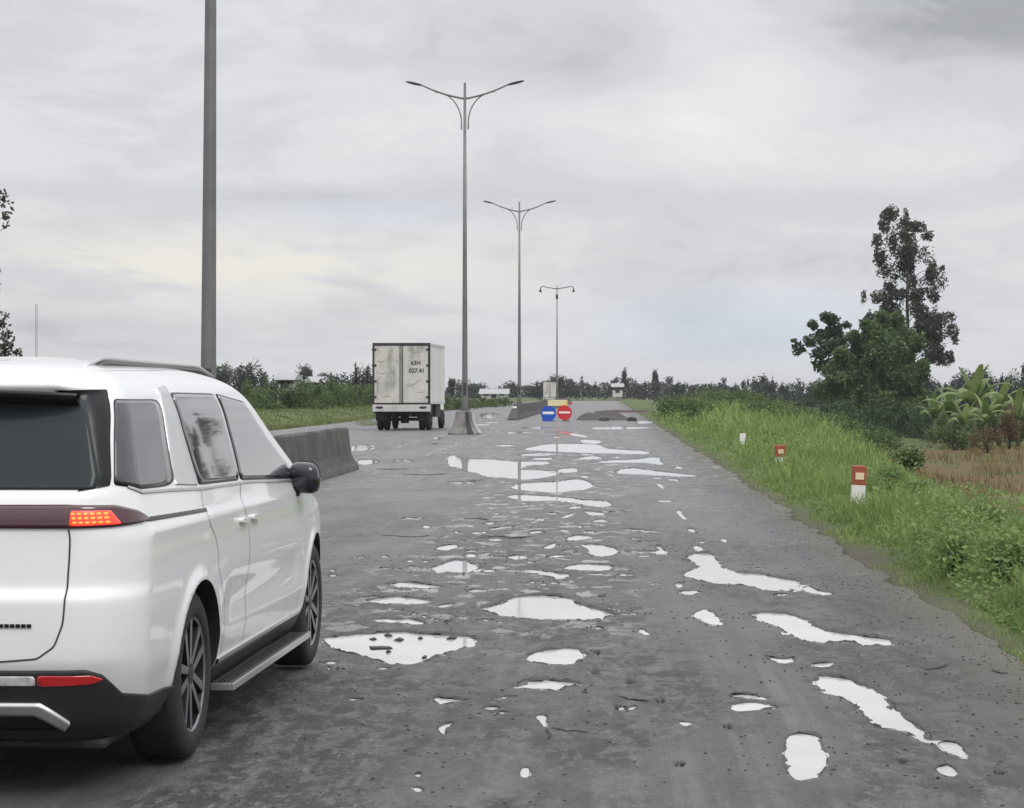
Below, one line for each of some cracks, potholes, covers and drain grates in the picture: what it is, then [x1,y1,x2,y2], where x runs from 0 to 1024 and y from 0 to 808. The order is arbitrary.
pothole [526,646,596,665]
pothole [926,740,968,759]
pothole [729,699,778,711]
pothole [682,550,801,592]
pothole [748,611,895,646]
pothole [510,478,594,493]
pothole [446,455,561,480]
pothole [812,672,932,743]
pothole [580,543,619,557]
pothole [322,629,481,664]
pothole [515,675,582,691]
